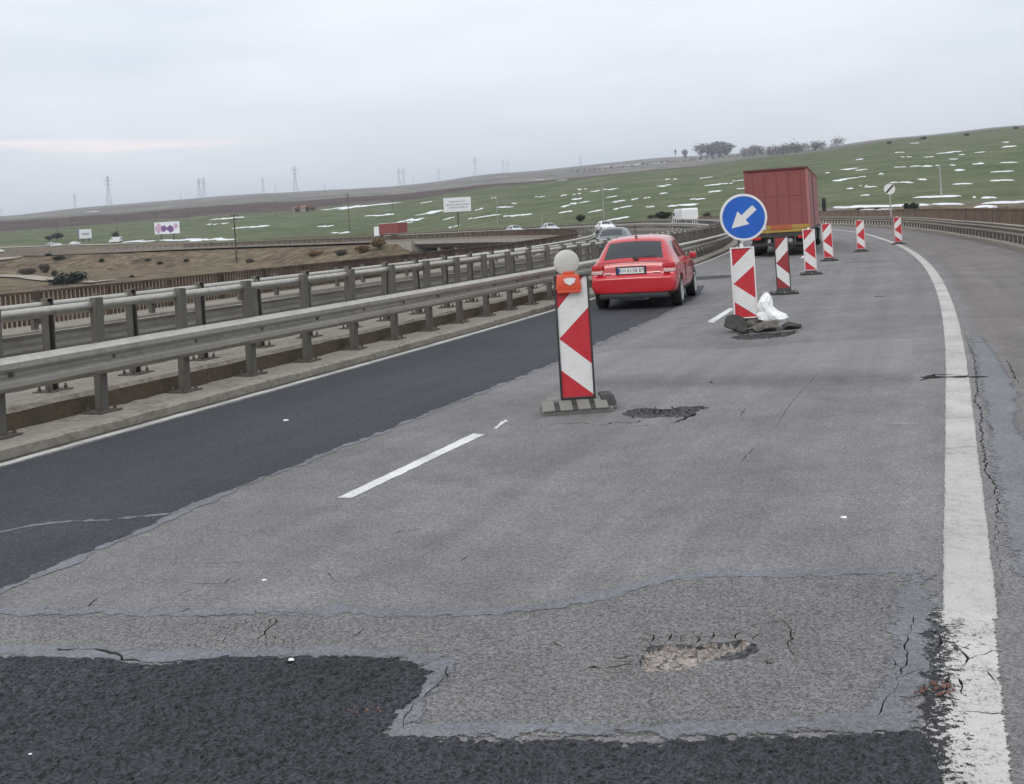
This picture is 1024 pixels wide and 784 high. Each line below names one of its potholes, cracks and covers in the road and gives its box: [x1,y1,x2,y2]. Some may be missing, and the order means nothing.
crack [58,562,336,664]
crack [934,627,1007,715]
crack [879,617,914,714]
pothole [621,406,710,419]
pothole [639,640,759,672]
crack [643,621,822,674]
